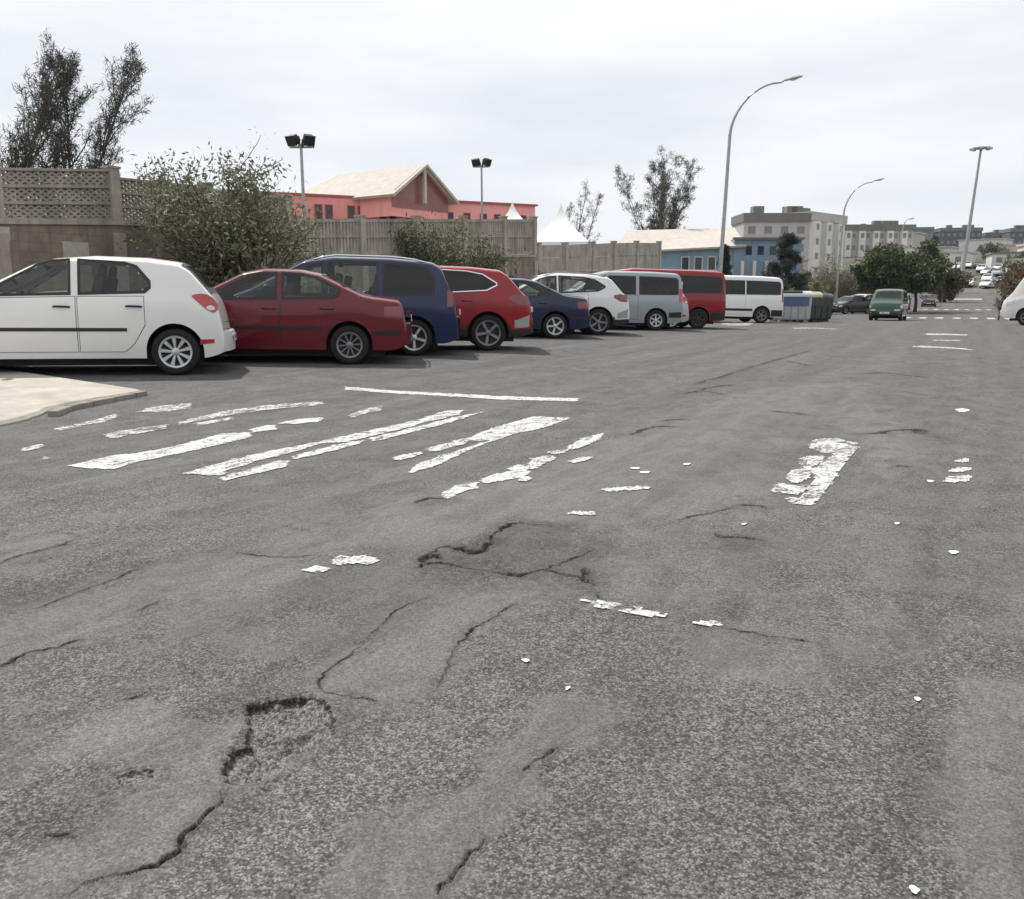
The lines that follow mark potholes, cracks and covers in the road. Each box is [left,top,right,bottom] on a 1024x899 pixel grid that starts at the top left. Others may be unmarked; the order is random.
crack [17,766,247,899]
pothole [204,690,352,801]
crack [300,495,653,710]
crack [0,633,168,709]
crack [224,549,328,562]
crack [618,418,699,437]
crack [0,531,174,617]
crack [501,738,578,784]
crack [843,428,940,438]
crack [668,502,784,547]
crack [412,823,508,899]
